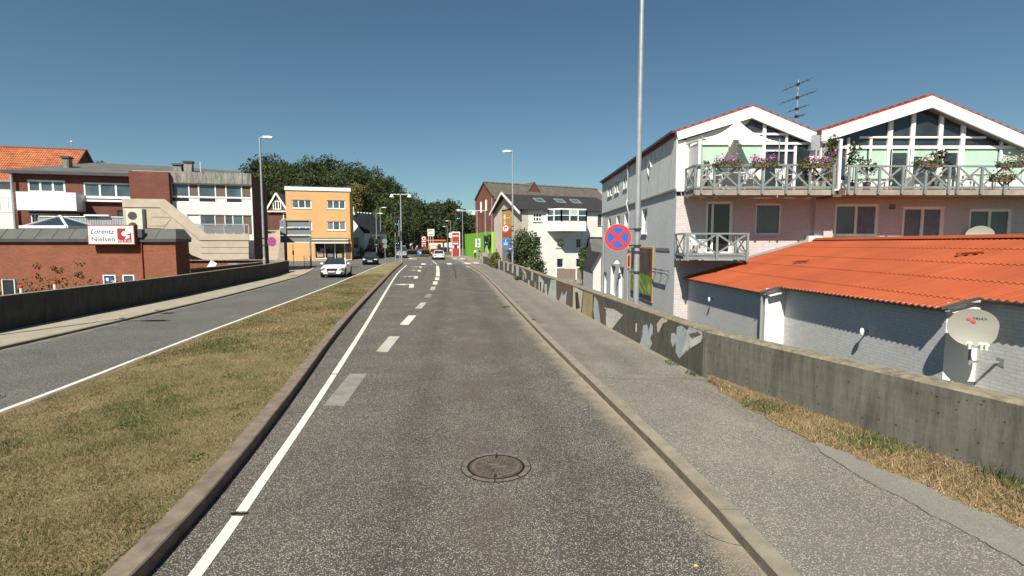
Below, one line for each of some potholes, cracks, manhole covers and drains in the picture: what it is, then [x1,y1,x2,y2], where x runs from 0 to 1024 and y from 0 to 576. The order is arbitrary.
manhole cover [461,453,531,483]
